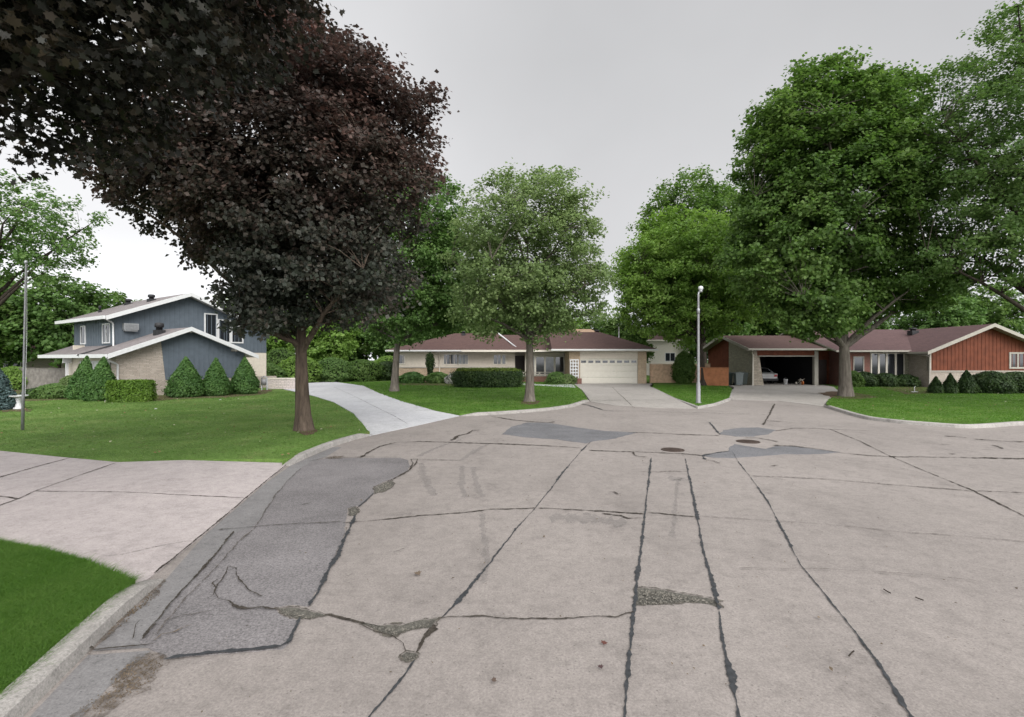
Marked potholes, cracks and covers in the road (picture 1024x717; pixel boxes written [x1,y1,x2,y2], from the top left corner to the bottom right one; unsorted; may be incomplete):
crack [440,611,633,619]
crack [741,567,970,580]
crack [123,457,337,640]
crack [327,613,406,651]
